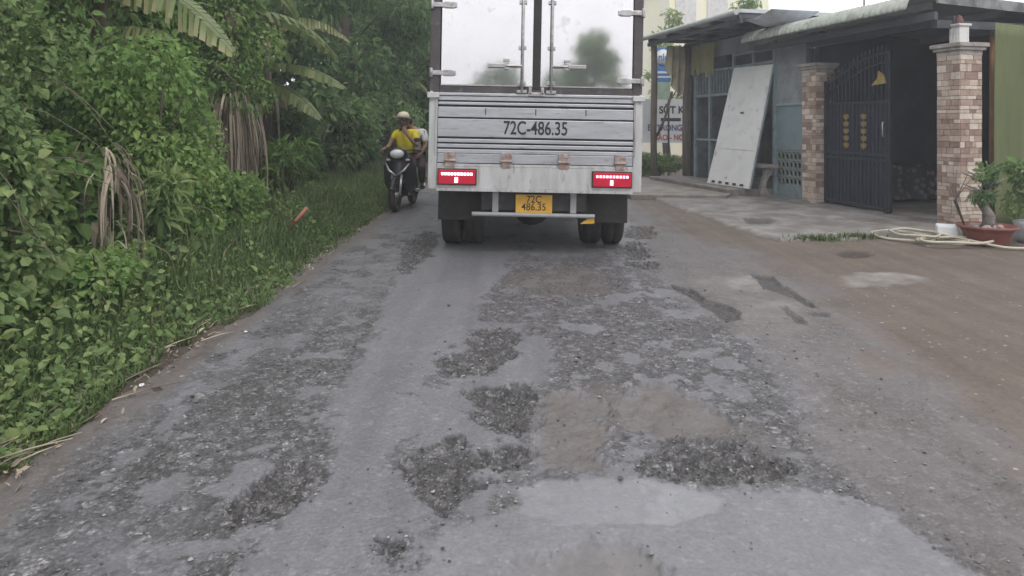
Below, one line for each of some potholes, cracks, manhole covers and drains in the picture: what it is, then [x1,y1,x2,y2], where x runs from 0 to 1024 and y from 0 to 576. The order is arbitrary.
pothole [371,532,418,567]
pothole [524,383,624,480]
pothole [624,436,800,487]
pothole [605,379,758,439]
pothole [457,381,541,439]
pothole [431,326,526,380]
pothole [218,461,337,525]
pothole [382,432,531,519]
